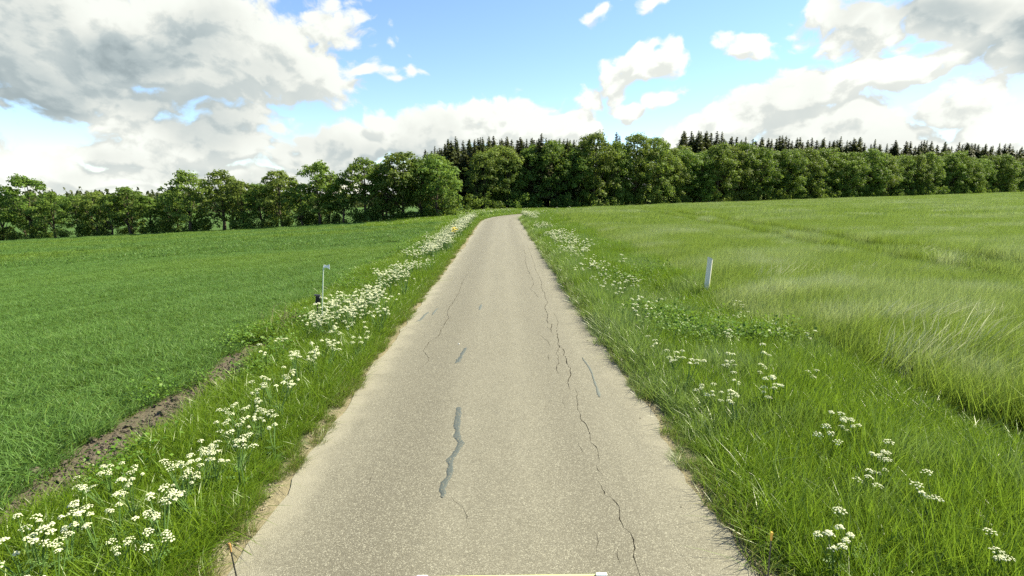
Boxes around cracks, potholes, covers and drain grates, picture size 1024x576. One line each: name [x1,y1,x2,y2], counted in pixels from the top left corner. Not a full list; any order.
crack [525,246,640,575]
